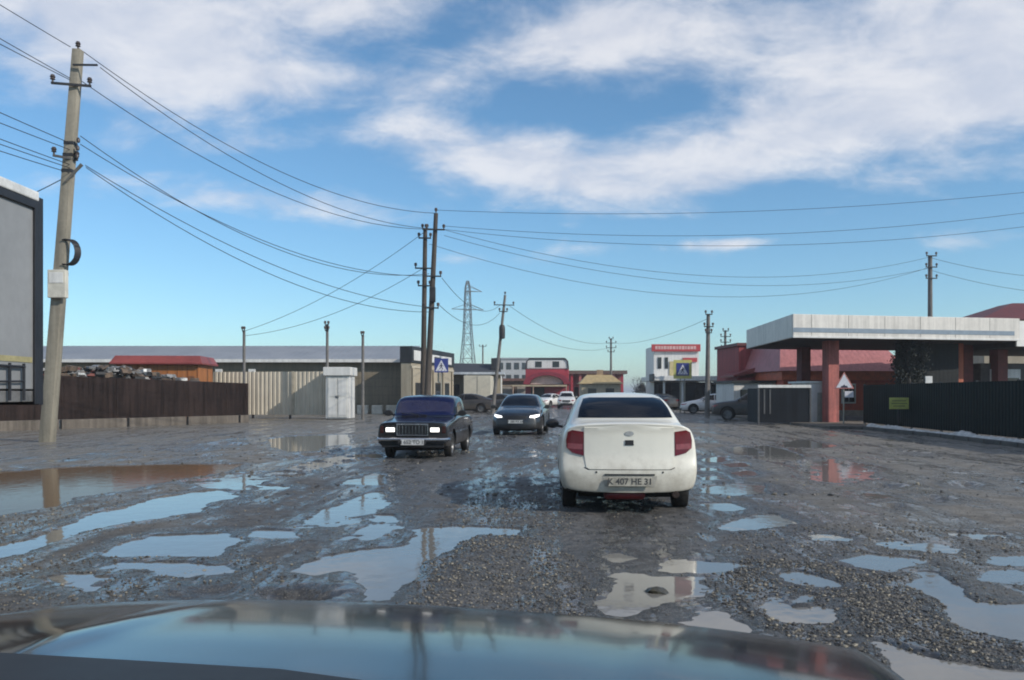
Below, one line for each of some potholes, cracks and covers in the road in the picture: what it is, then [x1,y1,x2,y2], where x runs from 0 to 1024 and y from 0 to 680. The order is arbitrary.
pothole [945,564,1024,591]
pothole [317,512,423,544]
pothole [238,579,353,602]
pothole [67,528,263,561]
pothole [0,489,231,561]
pothole [278,489,409,530]
pothole [873,571,1024,649]
pothole [698,510,820,535]
pothole [325,471,402,487]
pothole [689,481,782,497]
pothole [752,564,872,597]
pothole [260,521,542,604]
